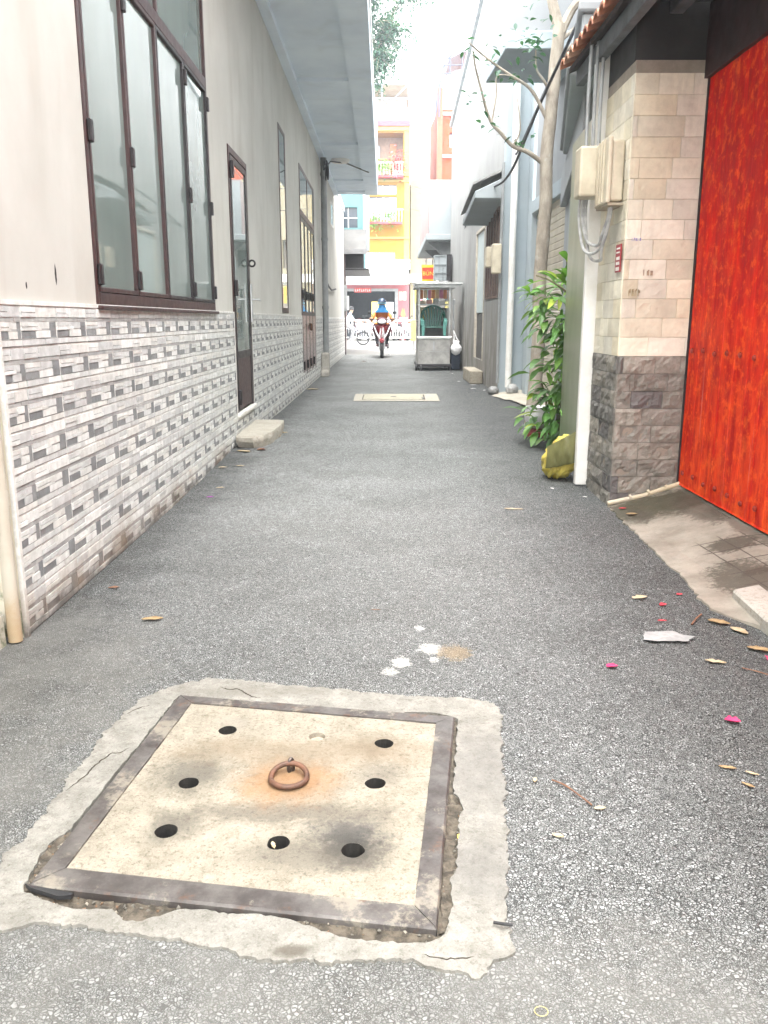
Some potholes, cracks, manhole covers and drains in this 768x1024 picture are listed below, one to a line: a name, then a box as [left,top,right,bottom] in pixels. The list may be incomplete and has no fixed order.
manhole cover [0,677,516,981]
crack [66,748,128,791]
